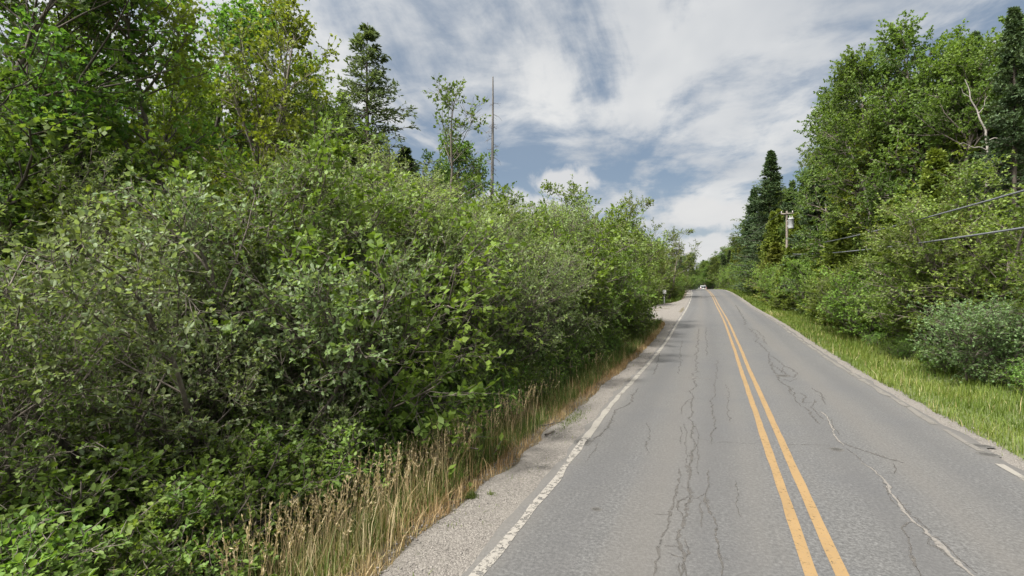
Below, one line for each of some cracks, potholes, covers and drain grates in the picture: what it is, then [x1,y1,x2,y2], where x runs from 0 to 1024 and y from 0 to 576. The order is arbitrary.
crack [735,305,975,576]
crack [652,329,754,576]
